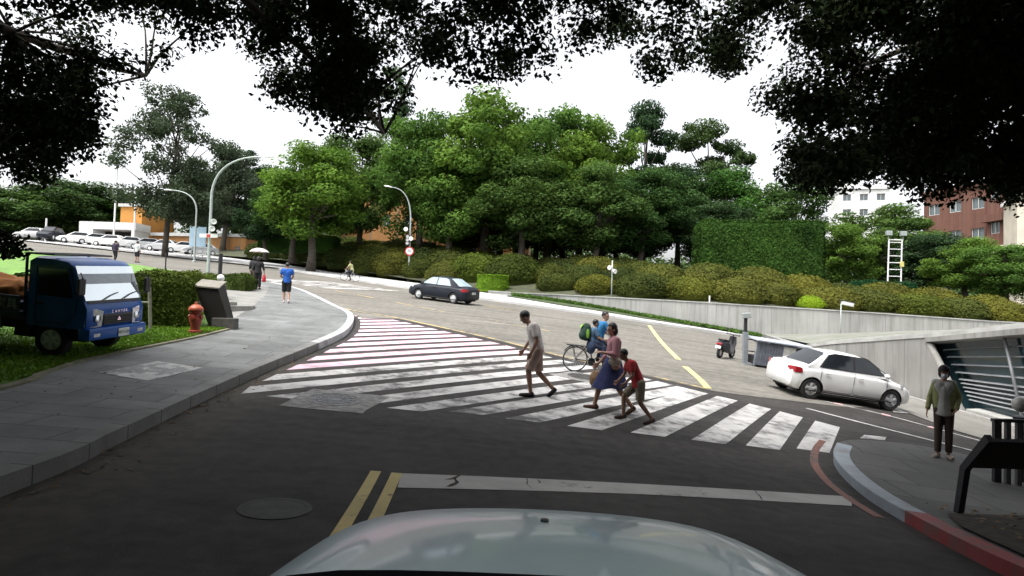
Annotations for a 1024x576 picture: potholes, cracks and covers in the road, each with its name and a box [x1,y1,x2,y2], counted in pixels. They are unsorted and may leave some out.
manhole cover [280,389,390,413]
manhole cover [237,498,313,520]
crack [448,474,461,487]
